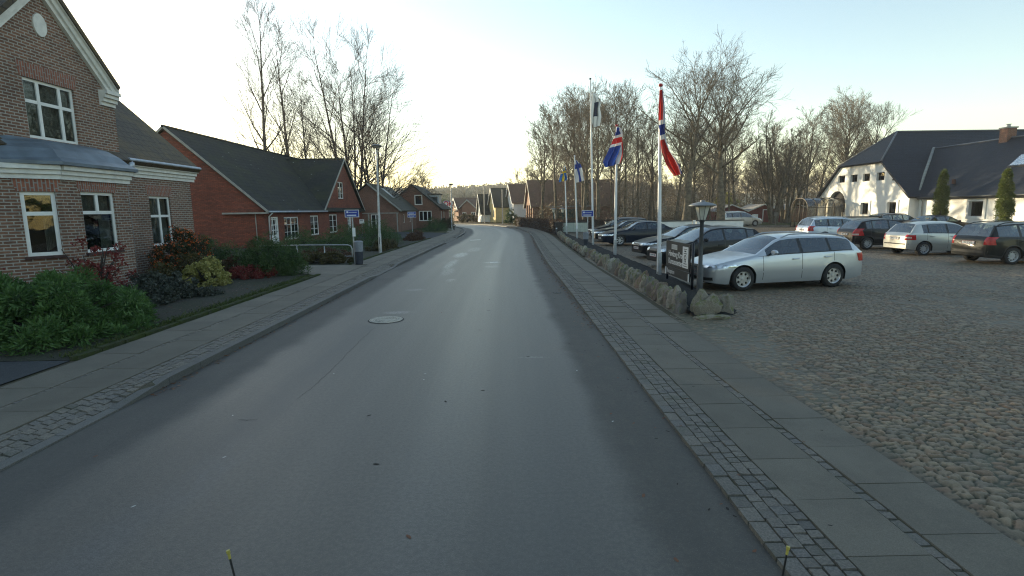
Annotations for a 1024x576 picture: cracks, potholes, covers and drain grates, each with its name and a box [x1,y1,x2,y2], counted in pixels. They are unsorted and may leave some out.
manhole cover [368,316,404,324]
